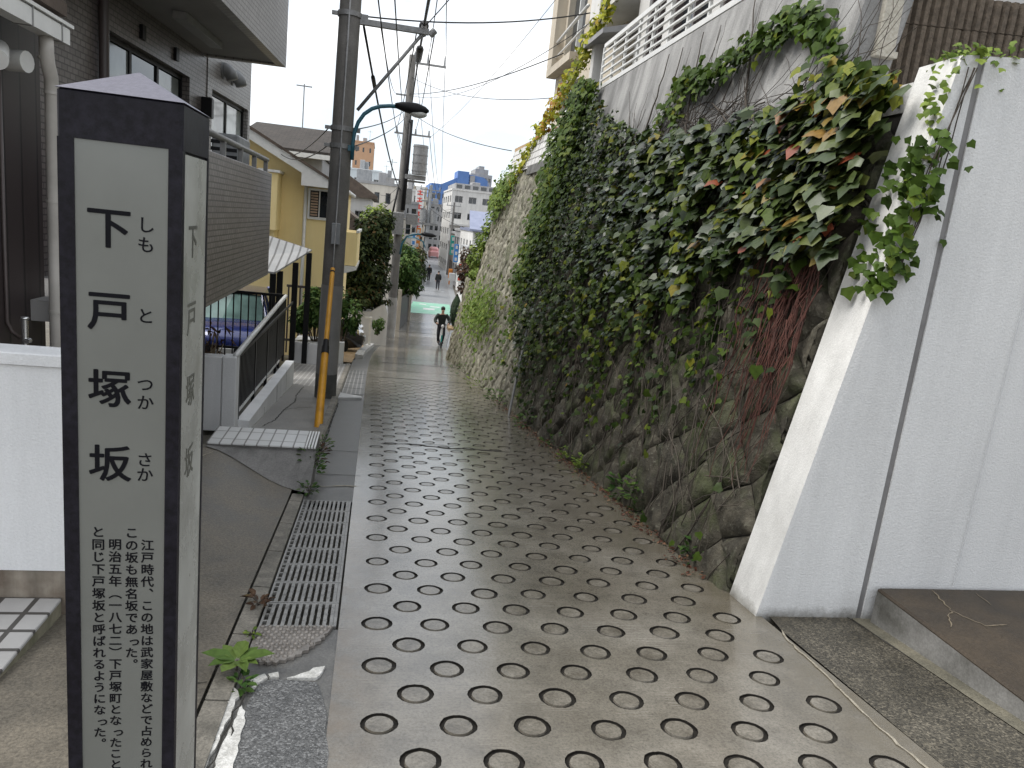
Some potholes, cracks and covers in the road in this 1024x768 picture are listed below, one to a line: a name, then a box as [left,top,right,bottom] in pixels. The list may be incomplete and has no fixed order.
crack [932,590,1007,627]
drain grate [259,500,351,630]
